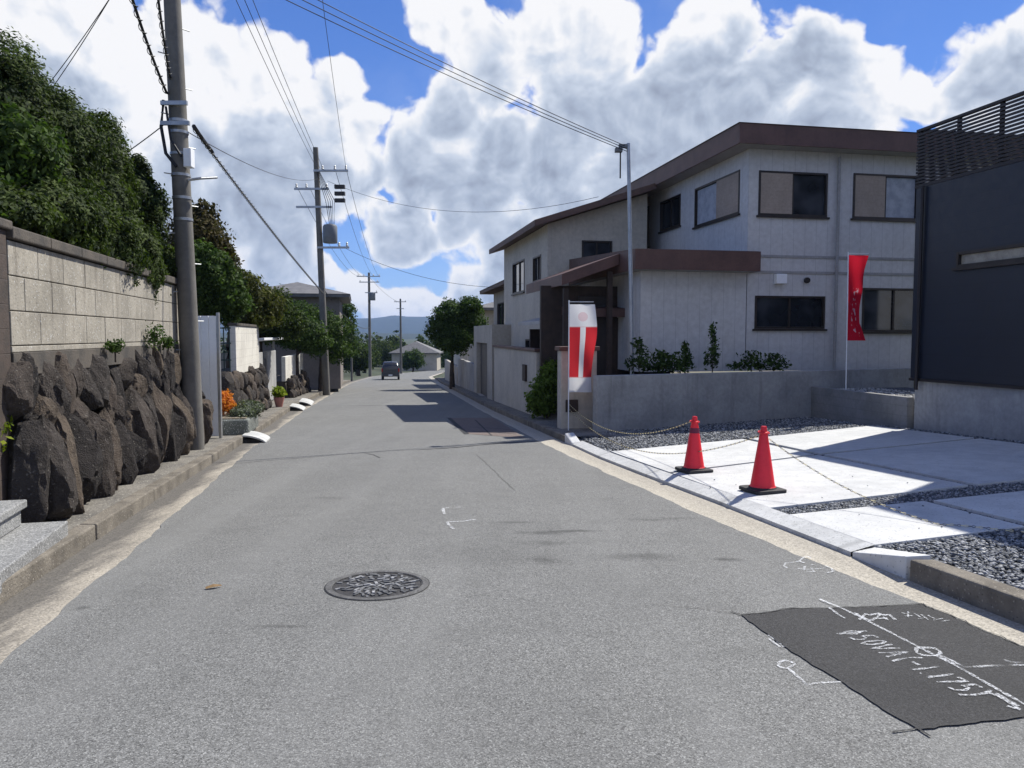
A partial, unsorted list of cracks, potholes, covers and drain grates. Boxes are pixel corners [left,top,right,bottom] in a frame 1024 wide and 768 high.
manhole cover [324,570,430,601]
